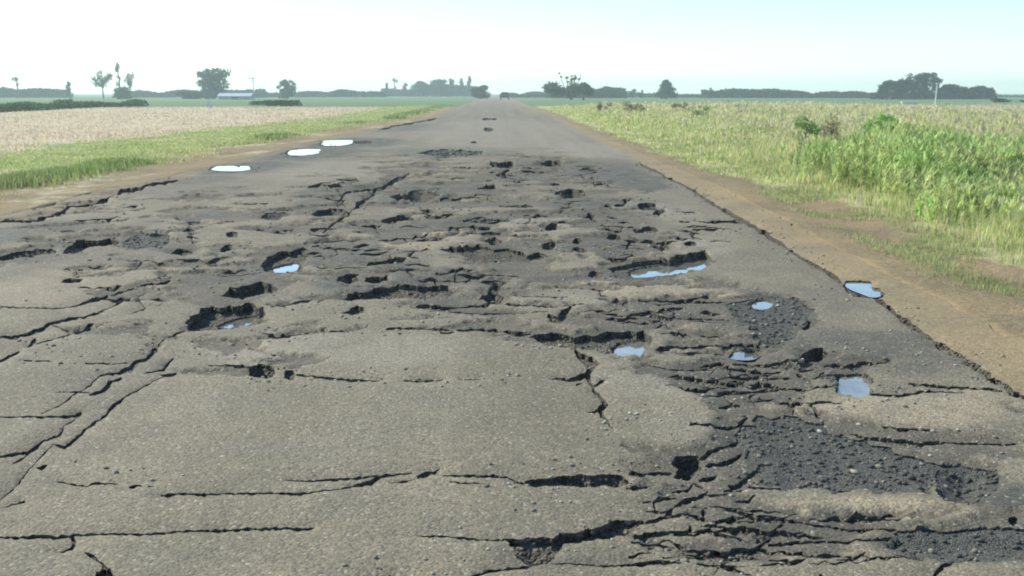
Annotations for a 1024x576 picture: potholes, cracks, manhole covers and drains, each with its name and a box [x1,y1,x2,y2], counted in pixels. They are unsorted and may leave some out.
pothole [671,455,702,481]
crack [0,164,1024,576]
pothole [221,281,278,300]
pothole [814,372,875,396]
pothole [185,302,266,331]
pothole [609,250,712,282]
pothole [528,330,653,358]
pothole [728,348,761,363]
pothole [260,250,309,273]
pothole [248,363,276,379]
pothole [843,280,885,303]
